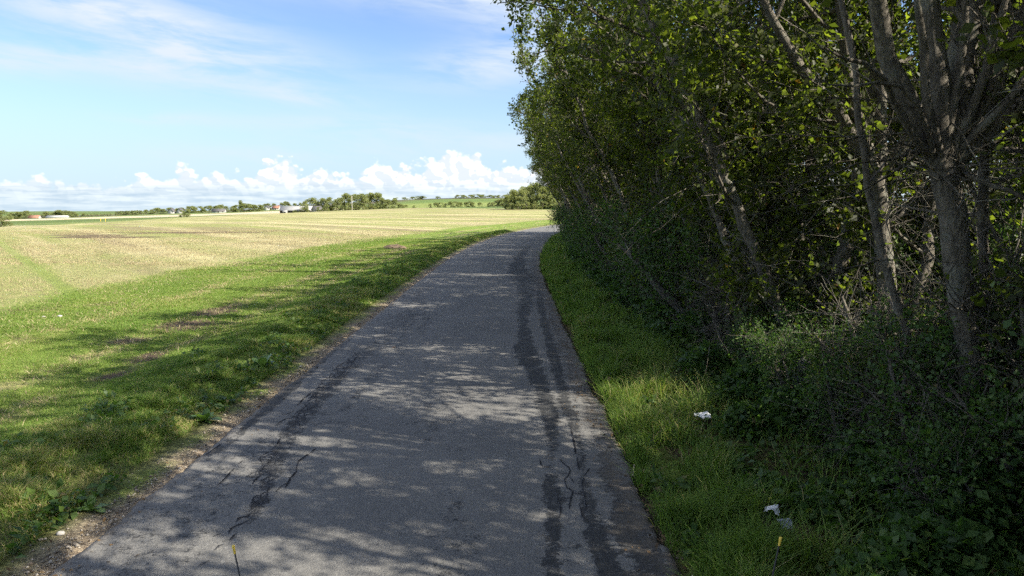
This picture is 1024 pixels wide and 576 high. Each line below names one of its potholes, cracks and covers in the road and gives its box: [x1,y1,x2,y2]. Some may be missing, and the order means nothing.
crack [199,355,360,566]
crack [539,425,590,520]
